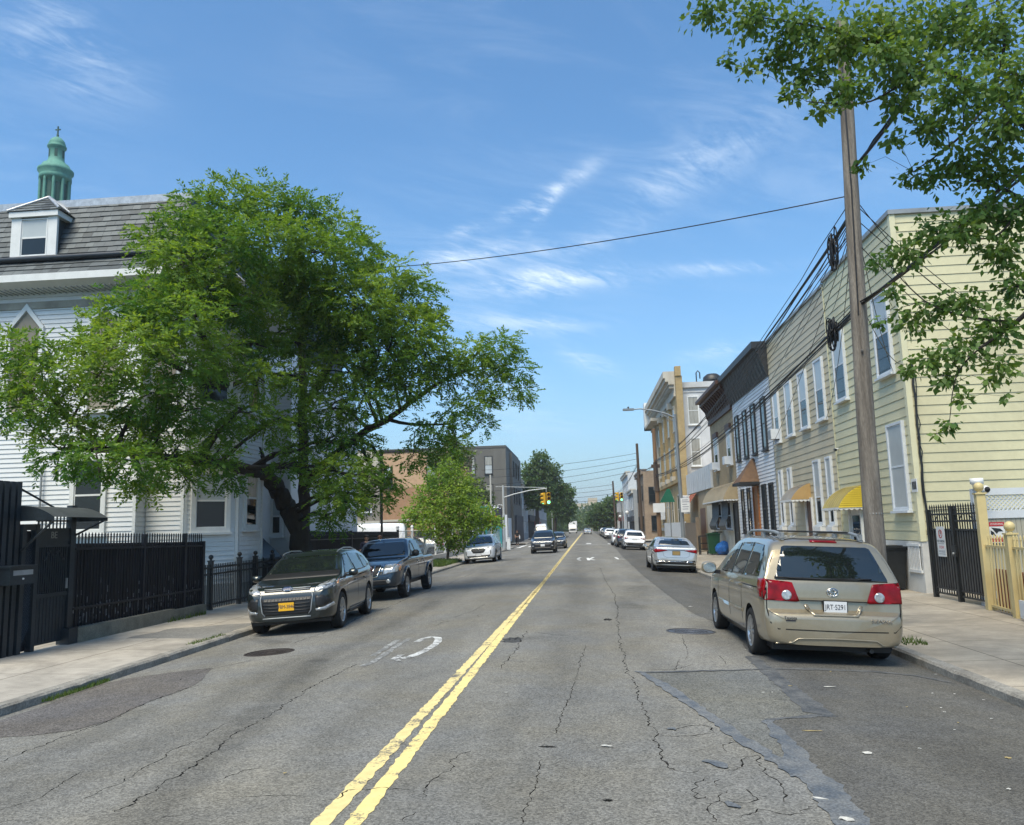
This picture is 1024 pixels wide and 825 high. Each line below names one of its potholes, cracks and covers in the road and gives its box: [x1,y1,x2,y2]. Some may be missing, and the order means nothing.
crack [1,660,251,762]
crack [82,664,357,812]
crack [521,646,586,824]
manhole cover [243,648,295,657]
crack [601,570,810,821]
